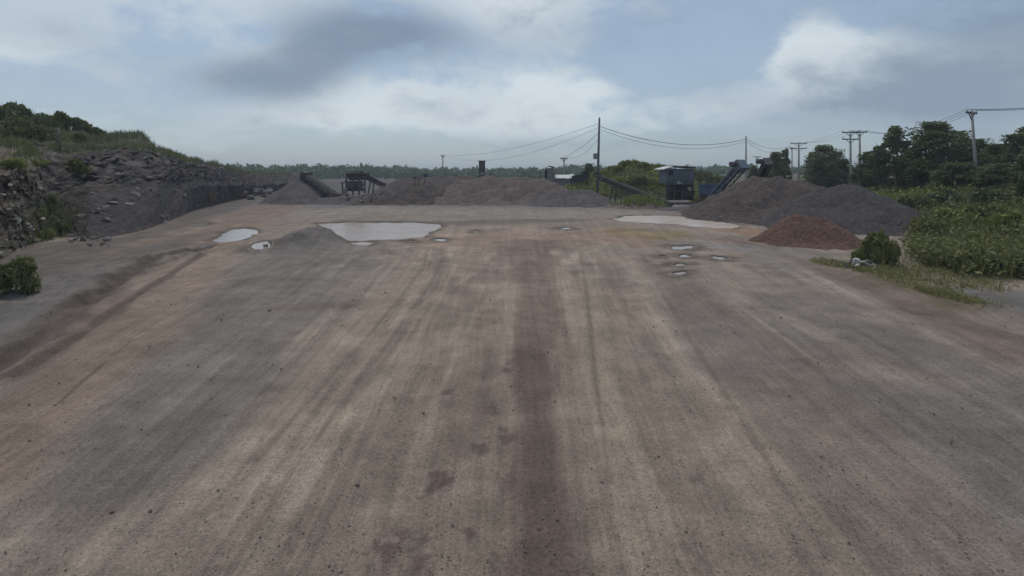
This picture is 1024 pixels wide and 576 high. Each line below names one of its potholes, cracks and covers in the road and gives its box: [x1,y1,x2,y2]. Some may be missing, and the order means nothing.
pothole [247,240,274,253]
